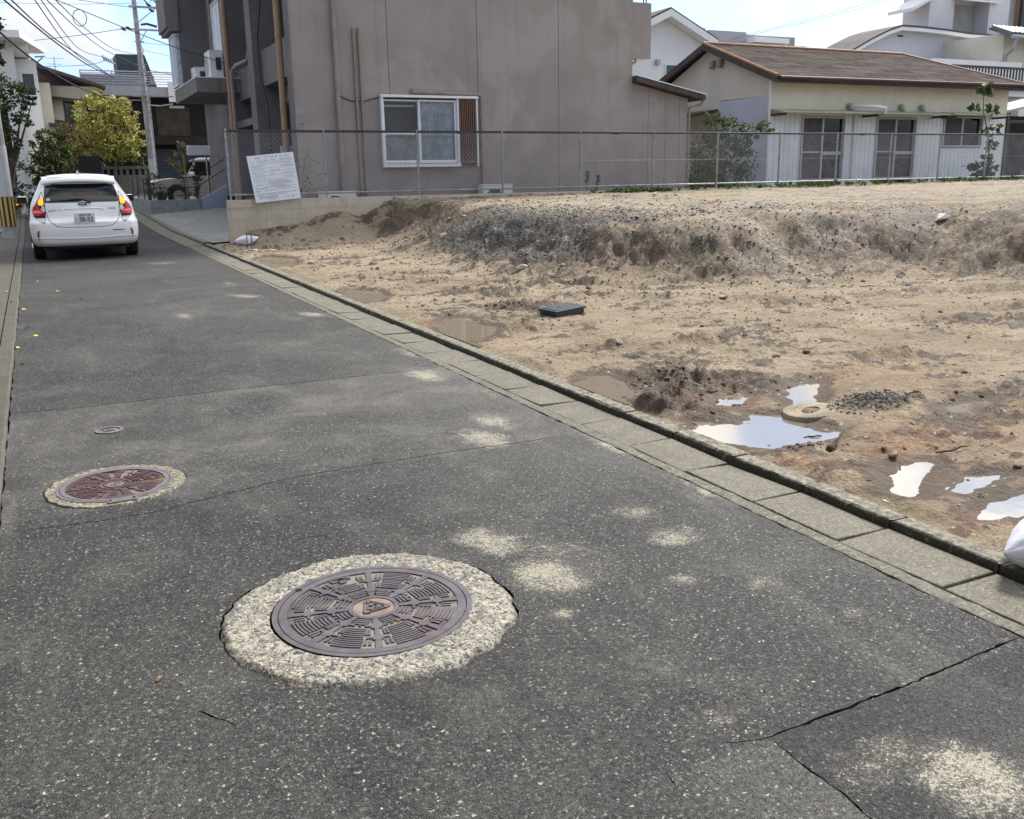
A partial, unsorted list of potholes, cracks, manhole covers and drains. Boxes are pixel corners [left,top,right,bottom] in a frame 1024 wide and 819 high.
manhole cover [43,464,186,509]
manhole cover [220,553,518,690]
crack [197,710,235,725]
utility cover [95,426,124,434]
crack [716,638,1018,819]
